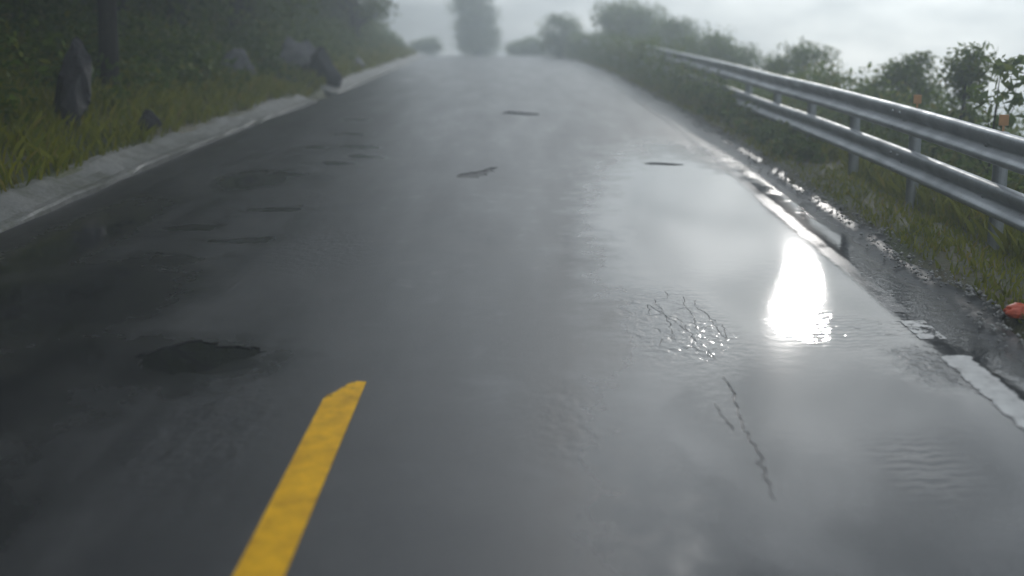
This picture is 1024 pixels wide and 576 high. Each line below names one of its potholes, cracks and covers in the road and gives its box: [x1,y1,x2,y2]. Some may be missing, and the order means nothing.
pothole [457,167,498,178]
crack [647,292,727,360]
pothole [132,339,267,375]
crack [715,376,775,501]
